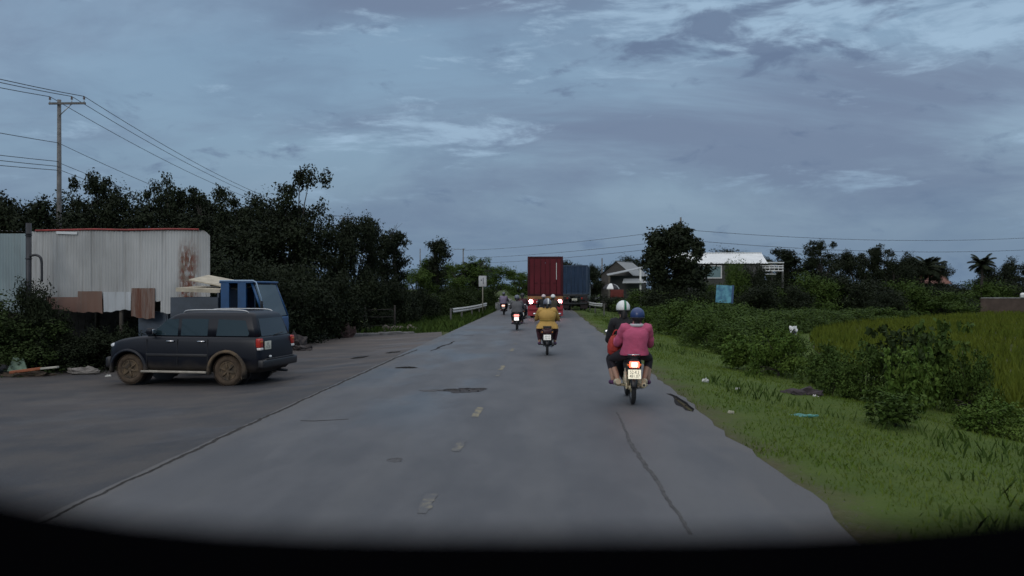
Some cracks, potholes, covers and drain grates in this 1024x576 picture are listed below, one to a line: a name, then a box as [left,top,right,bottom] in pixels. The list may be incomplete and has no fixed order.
pothole [668,394,694,411]
crack [616,412,692,533]
